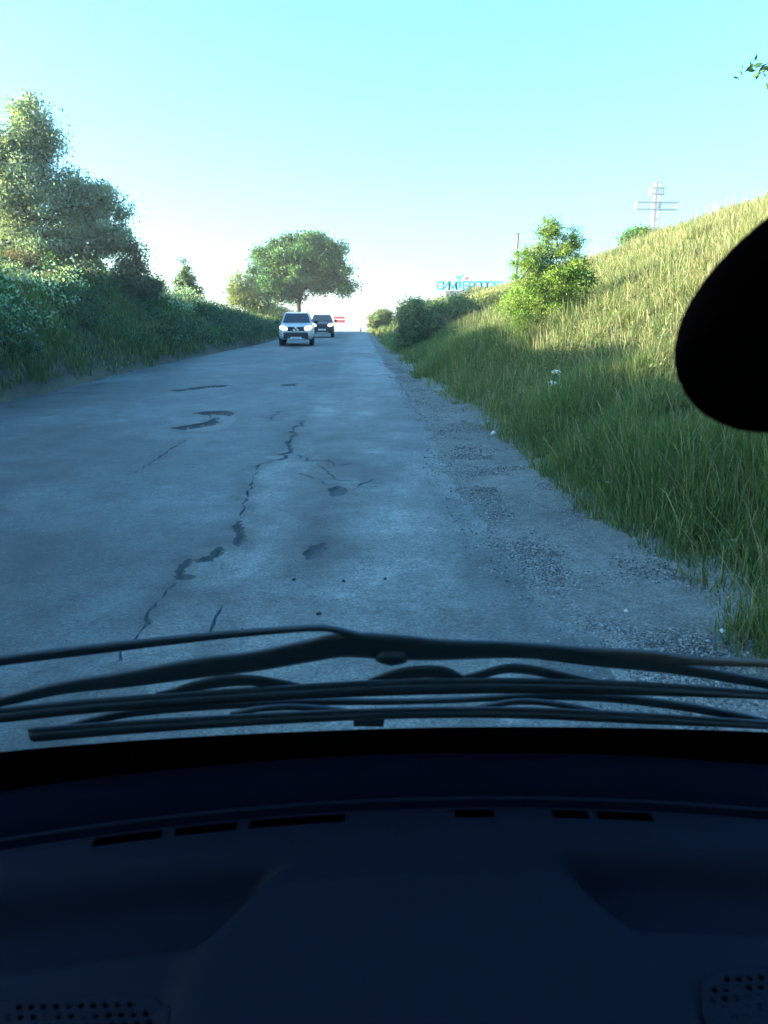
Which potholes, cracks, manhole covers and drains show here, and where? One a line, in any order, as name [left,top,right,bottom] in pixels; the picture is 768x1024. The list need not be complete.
pothole [193,547,225,563]
pothole [231,520,247,547]
pothole [301,542,329,560]
pothole [327,485,348,497]
crack [239,410,374,518]
crack [209,605,224,632]
pothole [173,559,197,581]
pothole [171,411,238,432]
